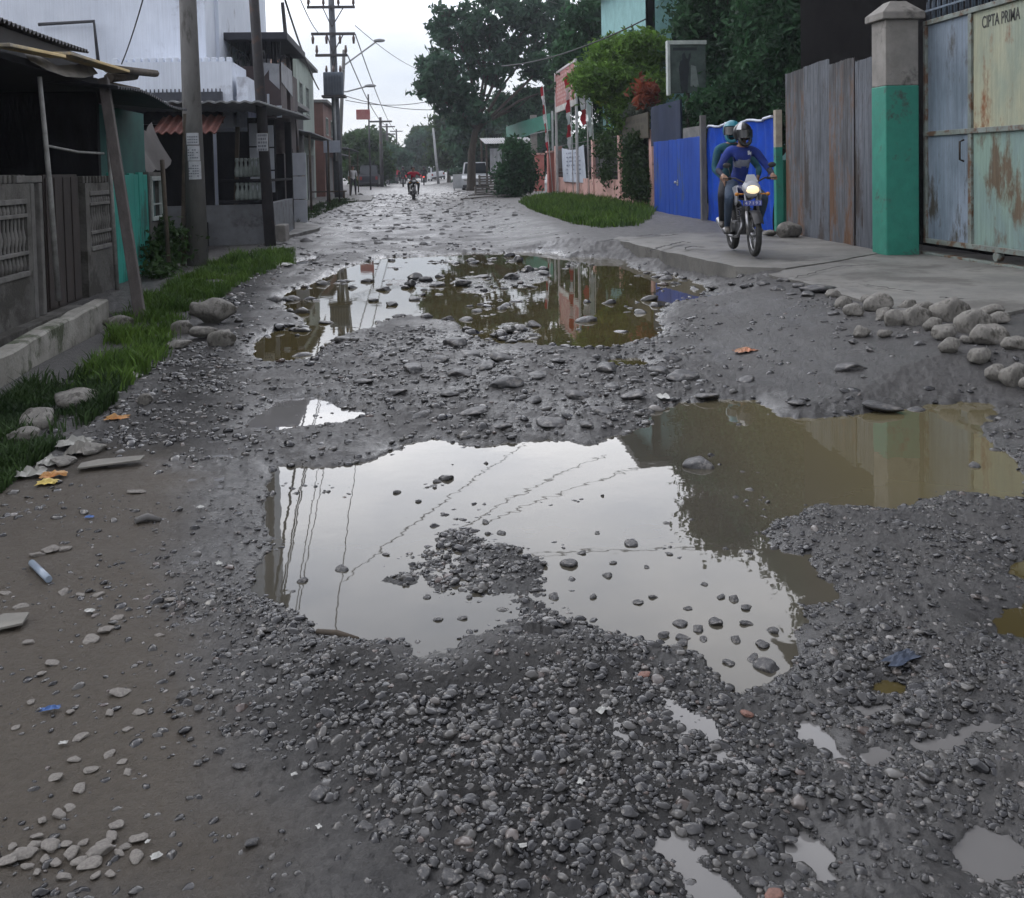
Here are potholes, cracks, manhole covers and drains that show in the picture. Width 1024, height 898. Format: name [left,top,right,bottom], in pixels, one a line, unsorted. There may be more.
pothole [232,386,1024,697]
pothole [921,796,1024,894]
pothole [234,245,725,362]
